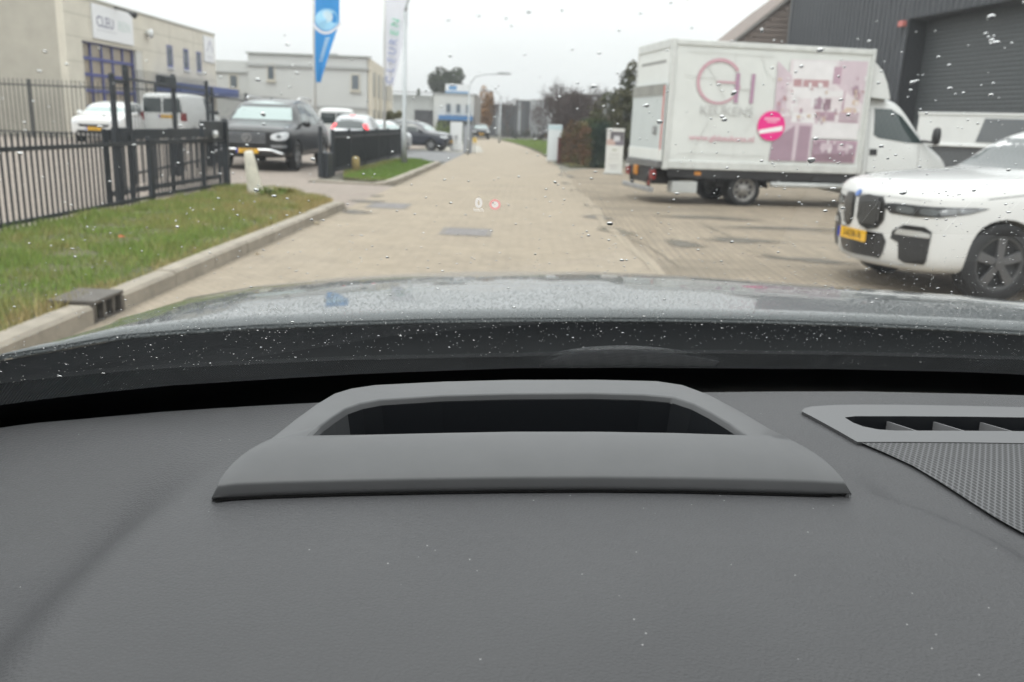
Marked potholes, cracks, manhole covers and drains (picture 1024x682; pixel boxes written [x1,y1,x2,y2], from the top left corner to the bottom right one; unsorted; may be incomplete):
manhole cover [439,227,493,236]
drain grate [47,288,124,324]
